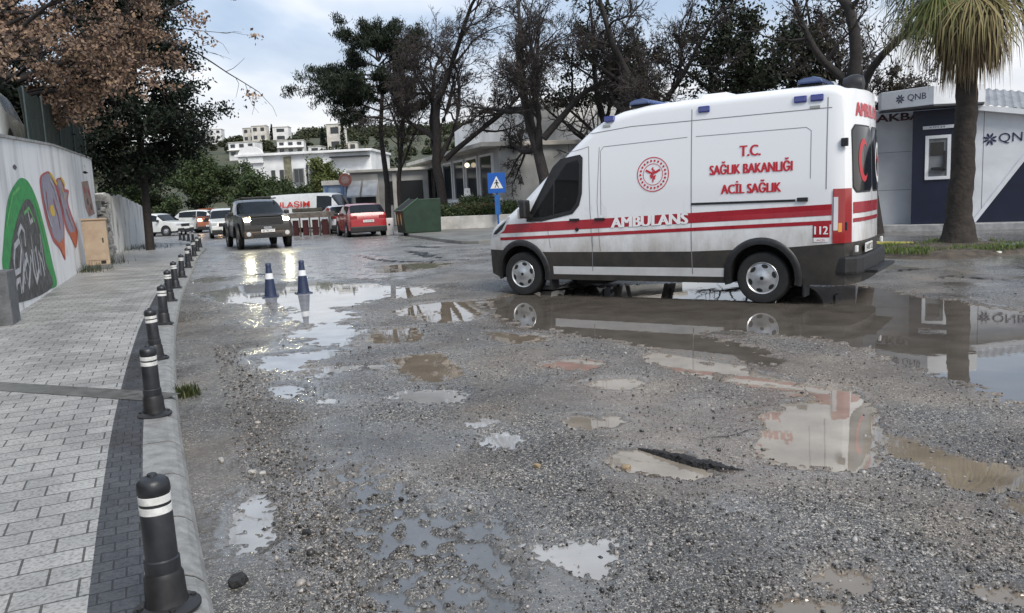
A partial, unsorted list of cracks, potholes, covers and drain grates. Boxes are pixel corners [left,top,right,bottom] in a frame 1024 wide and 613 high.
pothole [313,458,543,613]
pothole [184,280,410,348]
pothole [377,384,476,406]
pothole [597,444,744,481]
pothole [212,485,289,557]
pothole [246,346,353,374]
pothole [380,350,473,383]
pothole [468,427,537,451]
pothole [886,429,1024,495]
pothole [557,411,635,433]
pothole [371,324,434,344]
